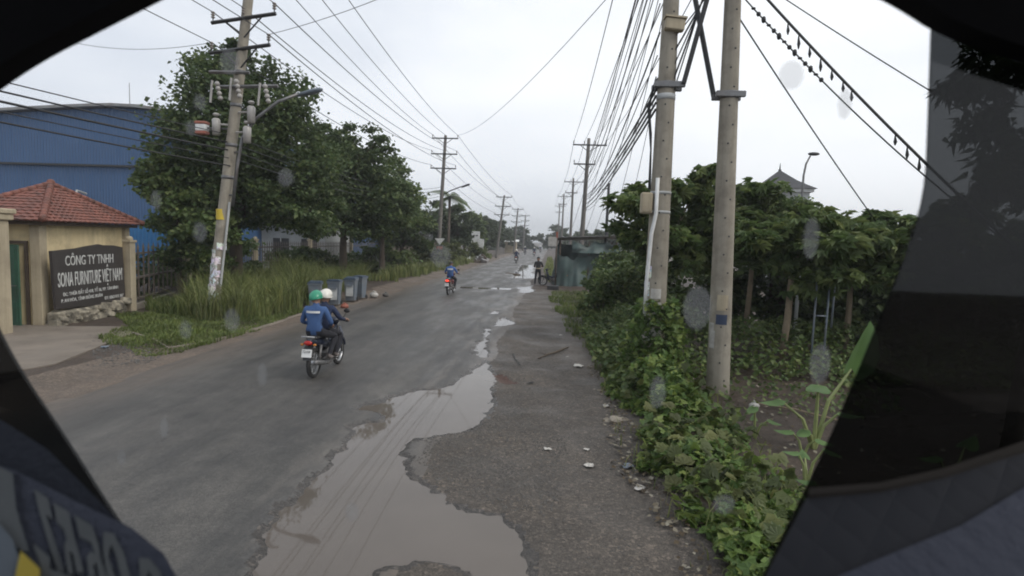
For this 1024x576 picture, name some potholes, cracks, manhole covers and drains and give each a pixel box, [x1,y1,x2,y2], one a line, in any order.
pothole [244,359,539,576]
pothole [470,327,495,357]
